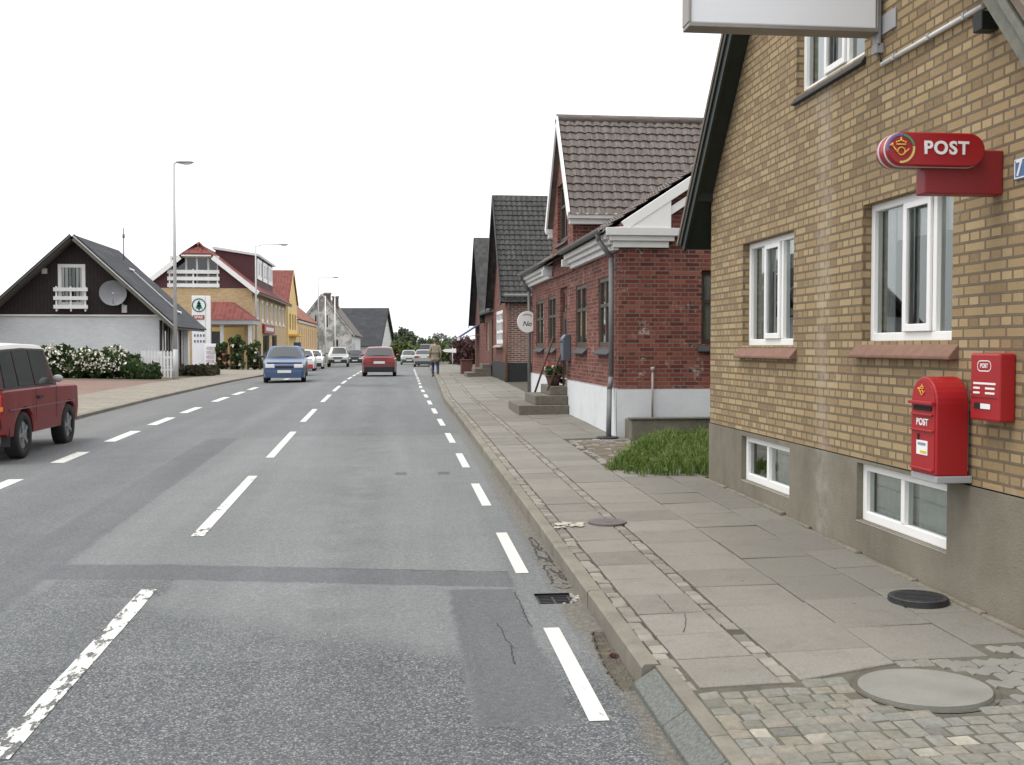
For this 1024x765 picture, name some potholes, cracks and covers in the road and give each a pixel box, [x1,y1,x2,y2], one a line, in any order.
manhole cover [554,518,627,528]
manhole cover [851,666,1002,713]
drain grate [534,593,581,604]
manhole cover [887,589,950,609]
crack [529,537,569,588]
